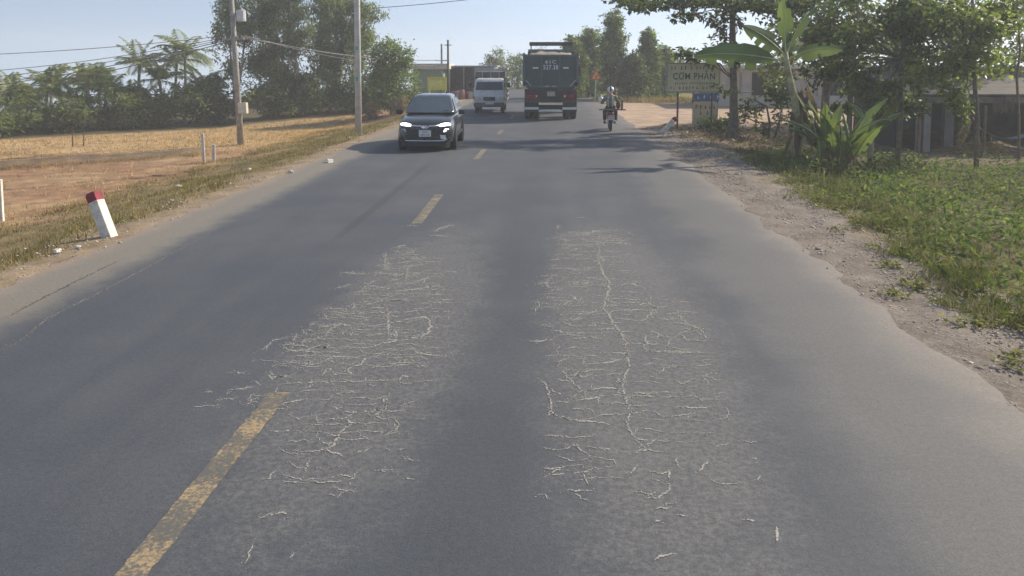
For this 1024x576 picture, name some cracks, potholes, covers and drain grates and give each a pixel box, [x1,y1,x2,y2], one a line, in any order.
crack [530,217,782,561]
crack [195,224,460,572]
